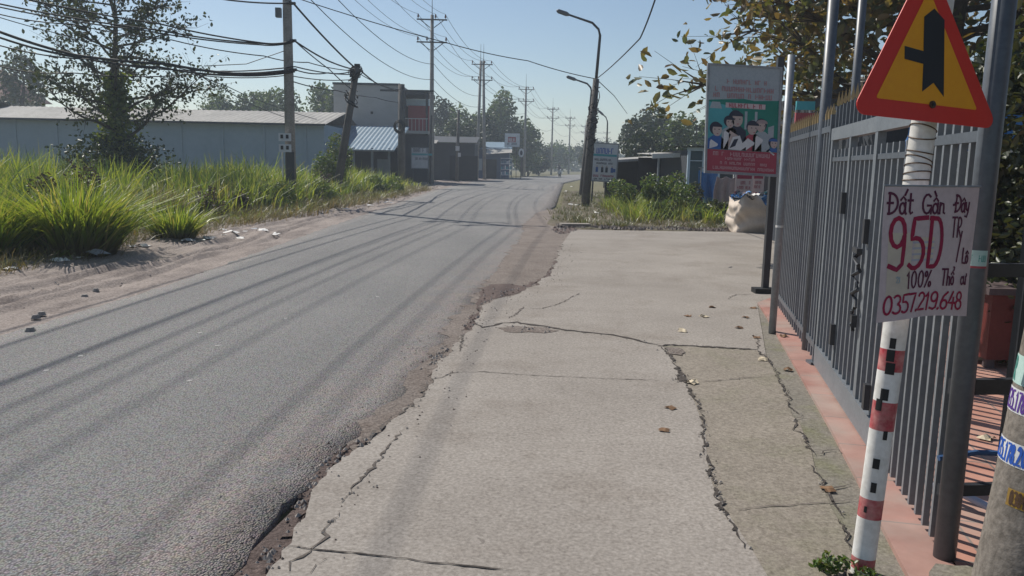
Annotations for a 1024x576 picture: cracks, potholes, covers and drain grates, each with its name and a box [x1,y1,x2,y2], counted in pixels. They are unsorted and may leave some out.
crack [457,293,853,548]
